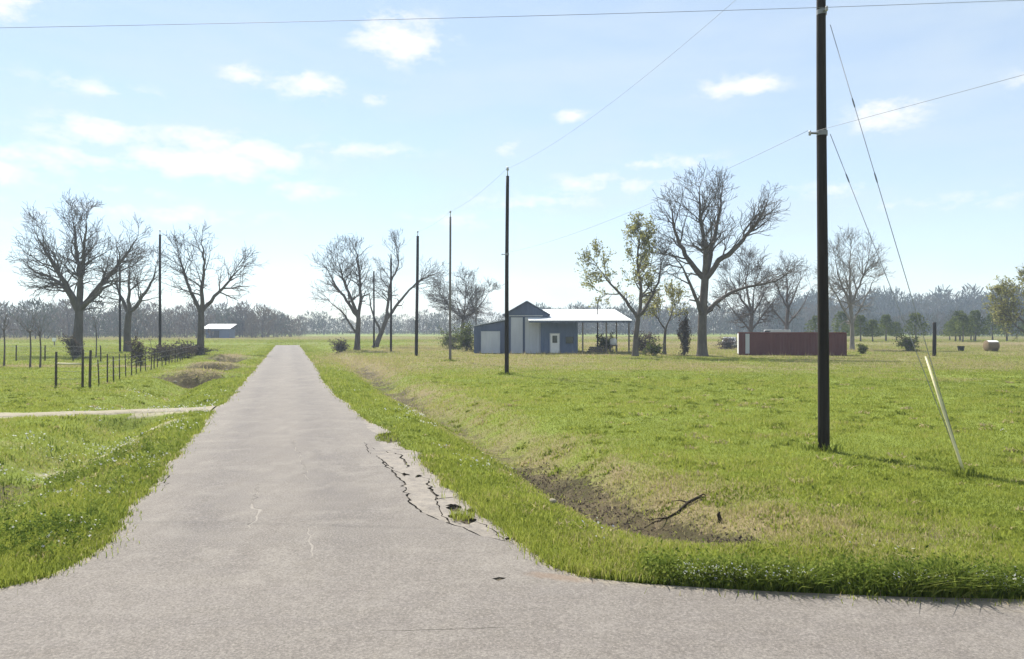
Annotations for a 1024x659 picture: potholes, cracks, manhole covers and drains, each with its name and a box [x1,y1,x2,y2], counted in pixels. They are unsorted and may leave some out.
crack [365,444,504,541]
crack [247,483,262,528]
crack [306,527,314,557]
